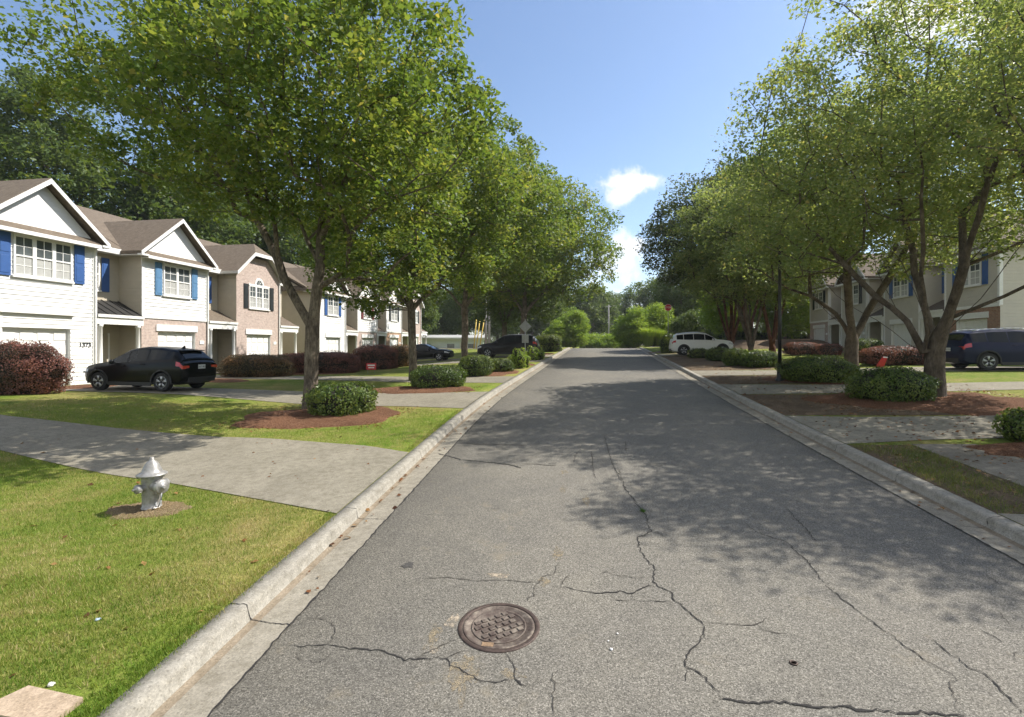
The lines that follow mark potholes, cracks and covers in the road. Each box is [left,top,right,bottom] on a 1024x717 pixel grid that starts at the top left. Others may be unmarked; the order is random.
manhole cover [458,603,540,653]
crack [429,434,1022,717]
